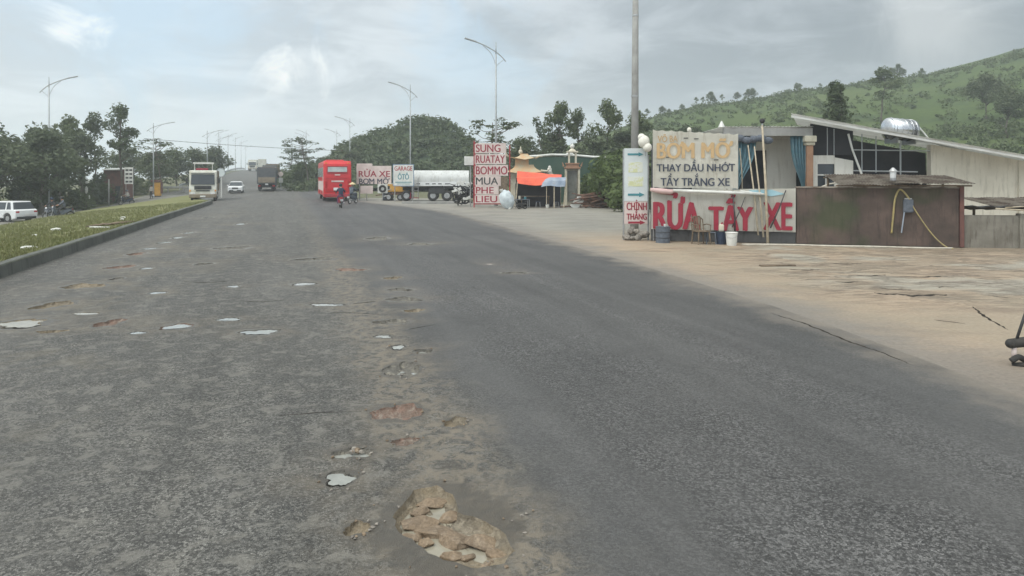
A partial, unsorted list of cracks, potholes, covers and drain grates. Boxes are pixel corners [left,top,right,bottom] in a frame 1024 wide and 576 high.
pothole [326,446,386,460]
crack [772,313,908,364]
pothole [317,469,365,491]
pothole [385,433,424,447]
crack [938,295,1020,329]
pothole [93,318,128,327]
pothole [442,414,474,429]
pothole [368,479,535,576]
pothole [0,318,47,329]
pothole [364,403,429,420]
pothole [343,519,378,540]
pothole [27,300,74,310]
